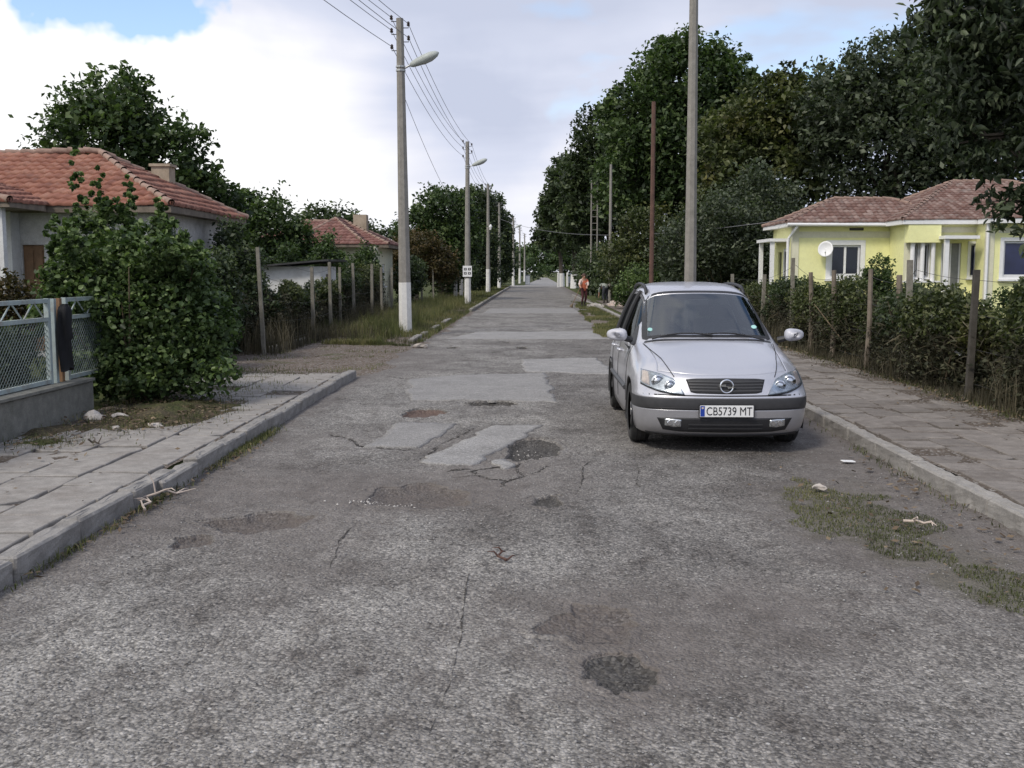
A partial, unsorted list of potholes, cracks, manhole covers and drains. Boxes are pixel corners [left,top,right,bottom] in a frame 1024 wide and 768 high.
pothole [185,509,325,537]
pothole [517,600,653,650]
pothole [395,408,454,419]
pothole [567,647,675,702]
pothole [523,494,572,512]
pothole [499,437,570,464]
pothole [352,481,479,512]
pothole [158,532,225,554]
crack [330,428,552,487]
crack [429,572,470,733]
